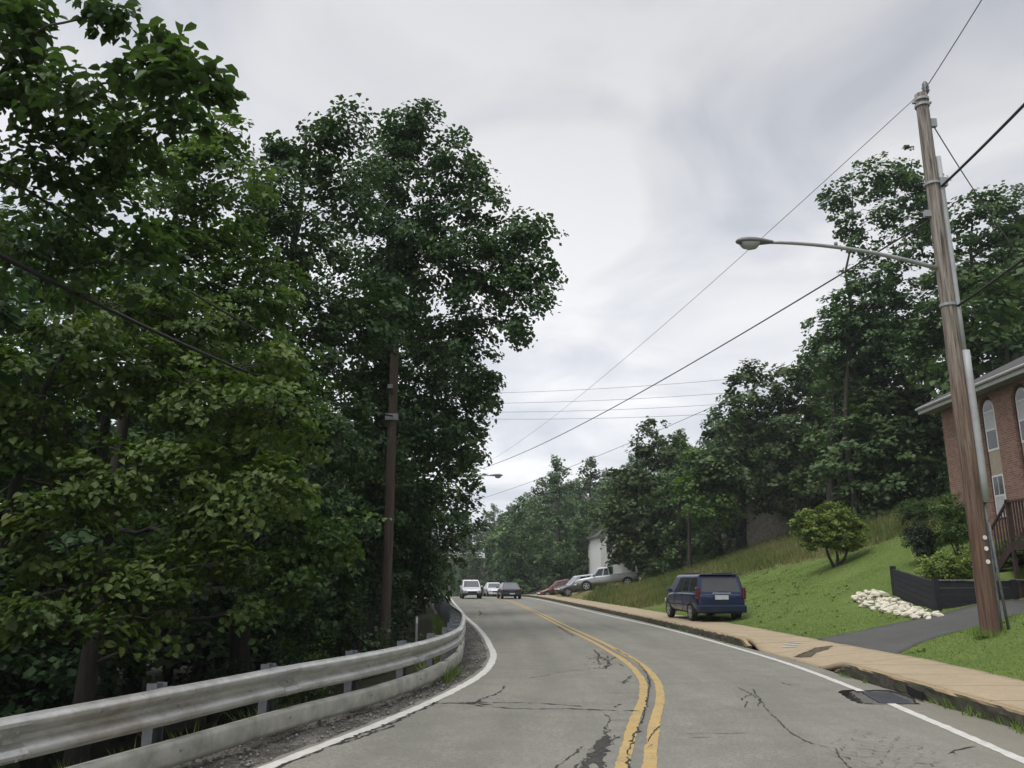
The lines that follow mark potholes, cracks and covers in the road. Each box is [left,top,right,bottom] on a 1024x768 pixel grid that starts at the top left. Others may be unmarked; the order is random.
crack [432,686,659,768]
crack [738,687,942,768]
drain grate [861,685,924,704]
crack [530,649,631,683]
